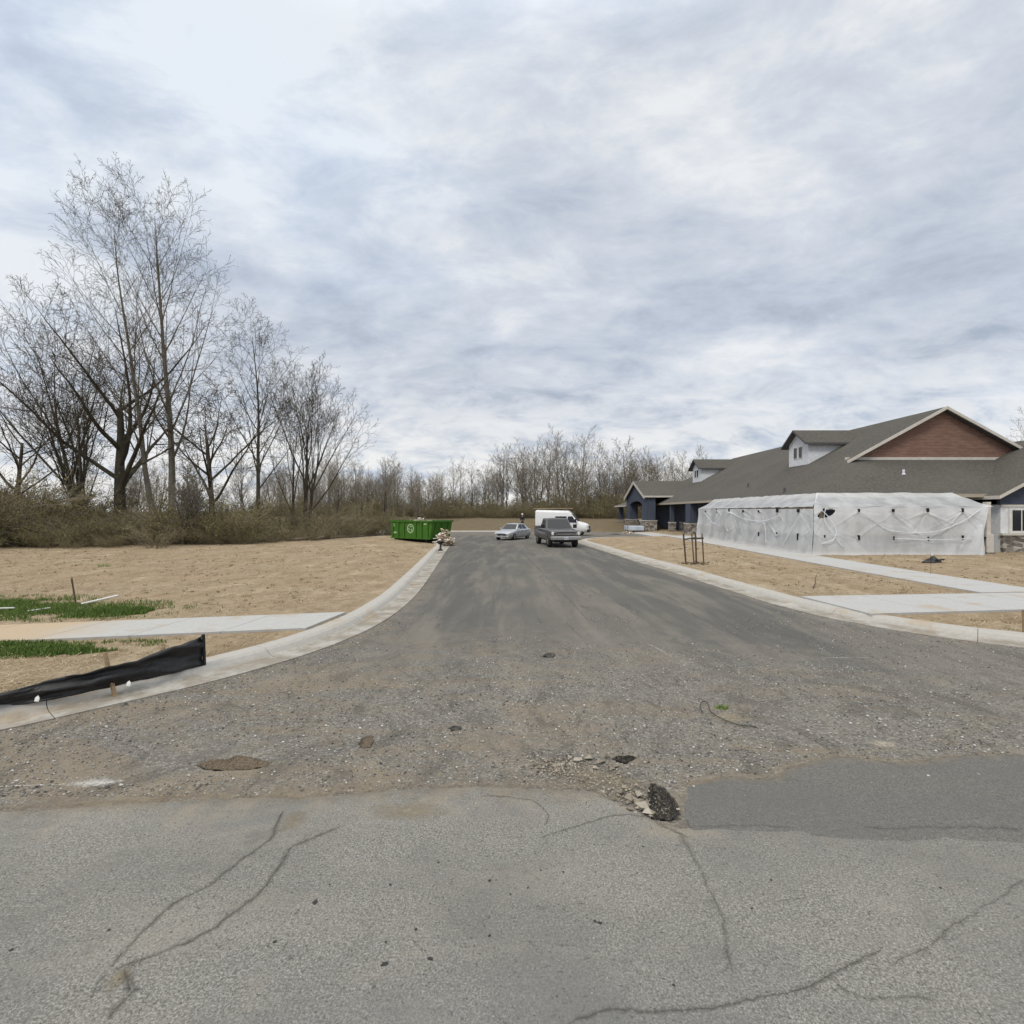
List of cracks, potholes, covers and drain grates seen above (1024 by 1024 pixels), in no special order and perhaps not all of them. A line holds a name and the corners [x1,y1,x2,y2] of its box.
pothole [648,783,681,821]
pothole [613,755,635,764]
crack [102,813,339,1017]
crack [572,949,881,1022]
